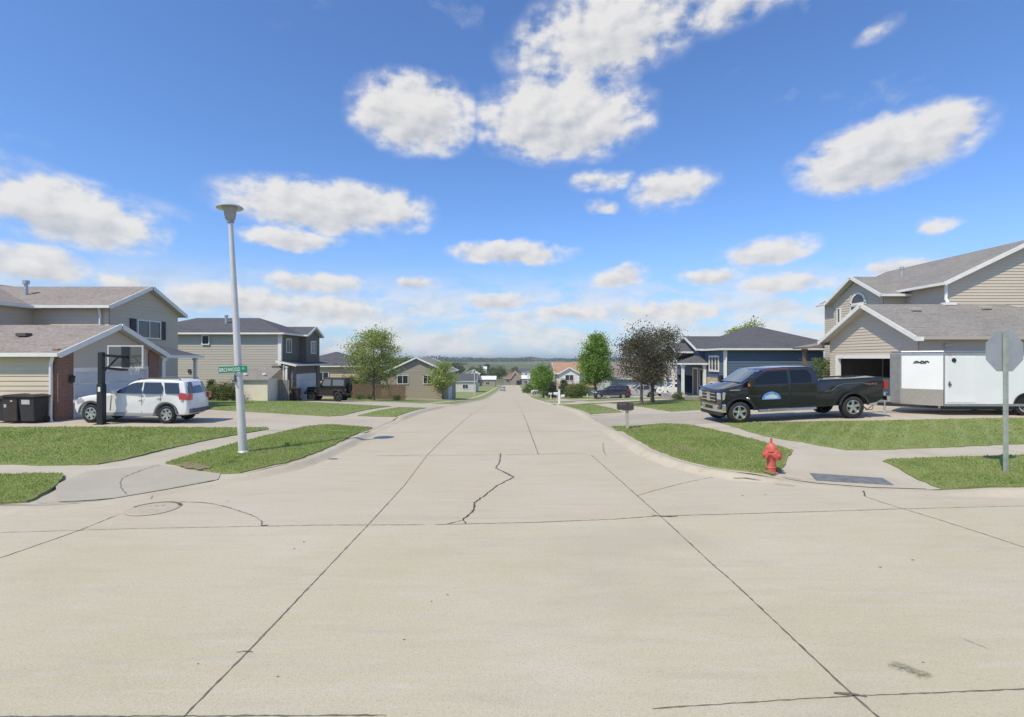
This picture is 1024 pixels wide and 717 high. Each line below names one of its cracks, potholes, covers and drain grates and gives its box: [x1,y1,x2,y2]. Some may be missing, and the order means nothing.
crack [447,453,514,524]
manhole cover [124,501,182,516]
